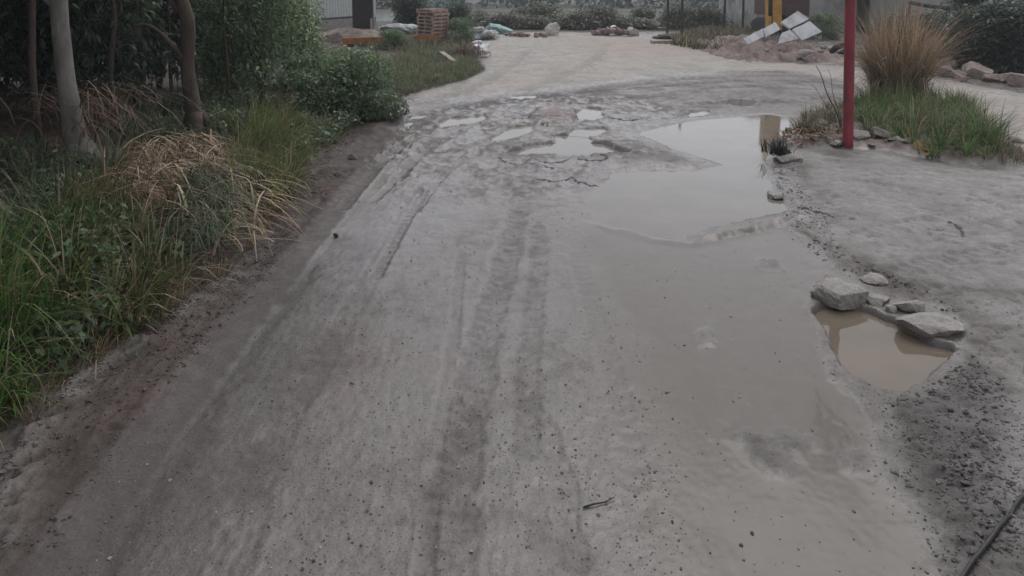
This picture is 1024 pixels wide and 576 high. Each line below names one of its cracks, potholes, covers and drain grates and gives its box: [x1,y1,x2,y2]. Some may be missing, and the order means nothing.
pothole [482,120,538,142]
crack [497,154,607,187]
pothole [435,113,492,128]
pothole [810,300,964,392]
pothole [496,132,635,157]
pothole [571,105,608,121]
